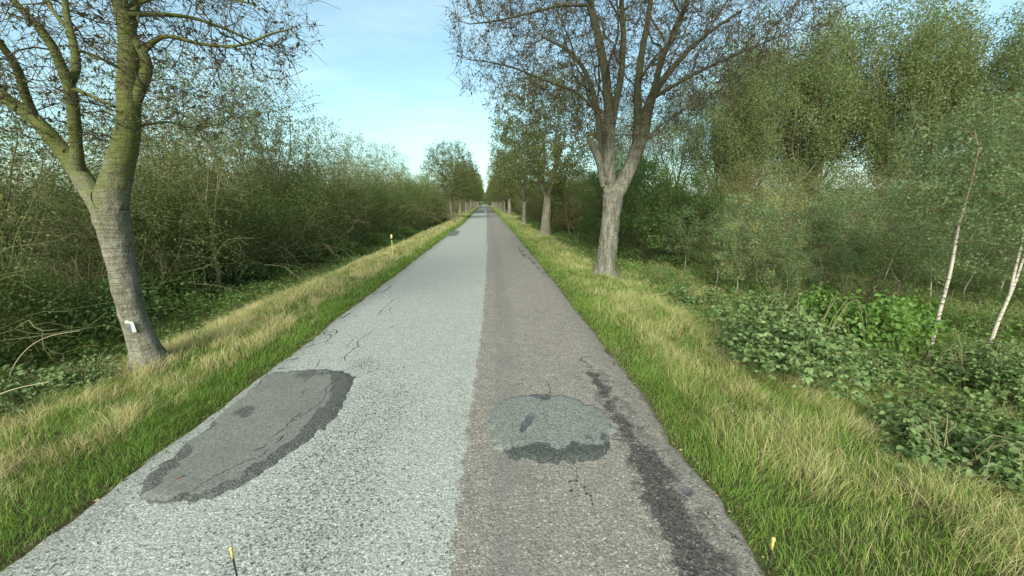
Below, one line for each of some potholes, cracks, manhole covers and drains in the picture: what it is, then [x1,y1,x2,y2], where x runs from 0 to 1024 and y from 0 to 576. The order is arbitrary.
crack [568,463,594,505]
